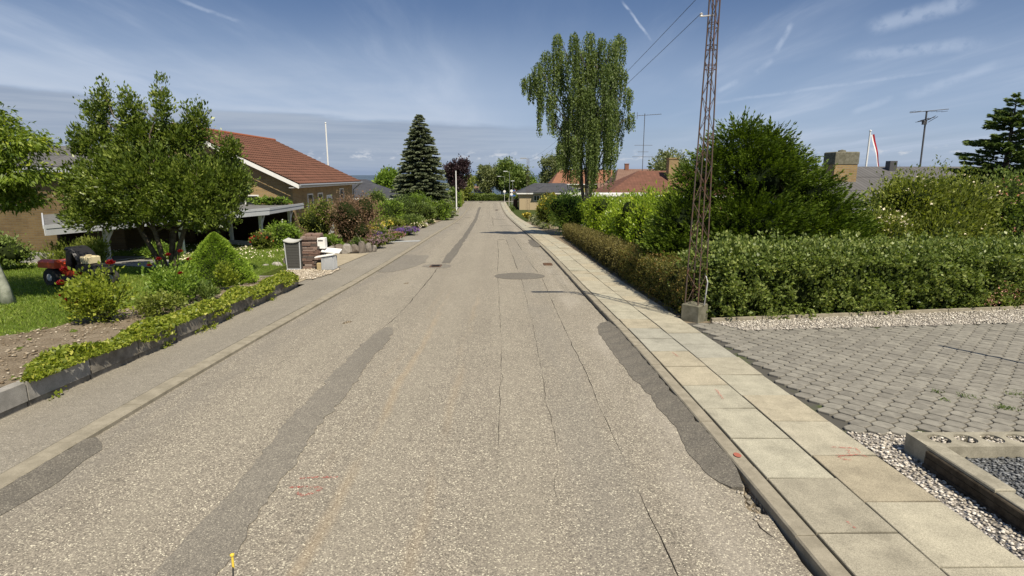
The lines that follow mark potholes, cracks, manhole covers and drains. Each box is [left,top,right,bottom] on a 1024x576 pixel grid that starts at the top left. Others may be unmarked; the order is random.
crack [497,239,563,530]
